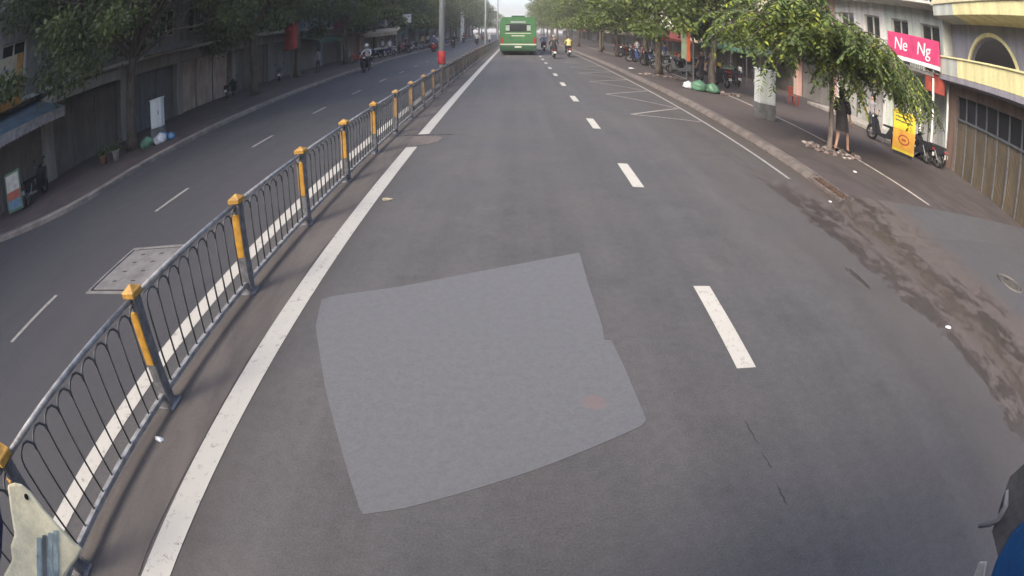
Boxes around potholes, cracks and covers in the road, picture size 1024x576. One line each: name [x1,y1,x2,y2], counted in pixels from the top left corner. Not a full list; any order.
drain grate [808,175,854,202]
crack [746,423,787,504]
manhole cover [997,273,1023,294]
manhole cover [86,244,189,294]
